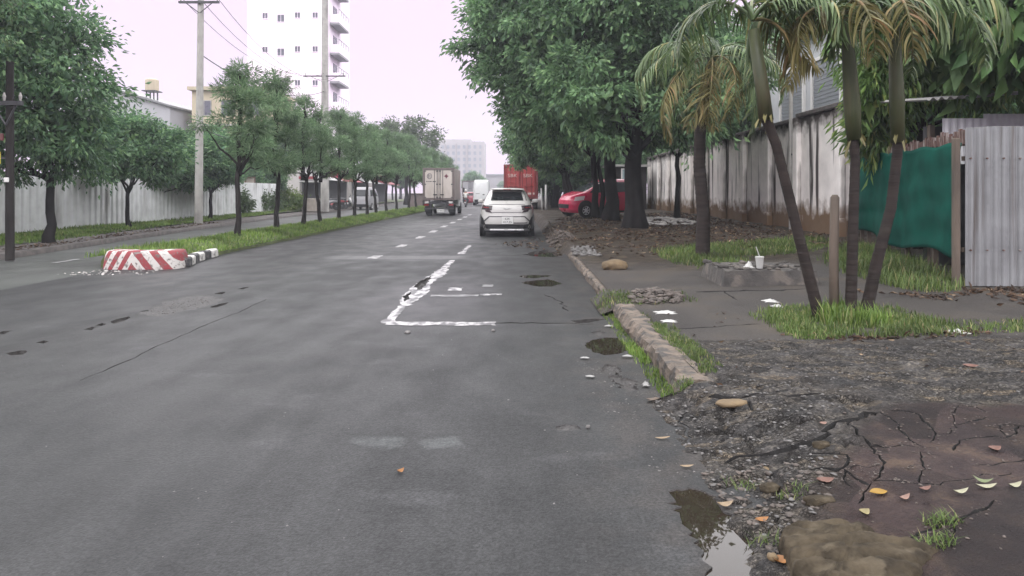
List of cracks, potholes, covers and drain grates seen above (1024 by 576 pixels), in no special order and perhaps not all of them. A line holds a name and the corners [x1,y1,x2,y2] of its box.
pothole [585,337,627,355]
crack [708,393,1024,549]
crack [80,300,265,381]
pothole [667,487,755,576]
pothole [521,279,562,287]
pothole [522,249,564,257]
crack [504,294,578,324]
